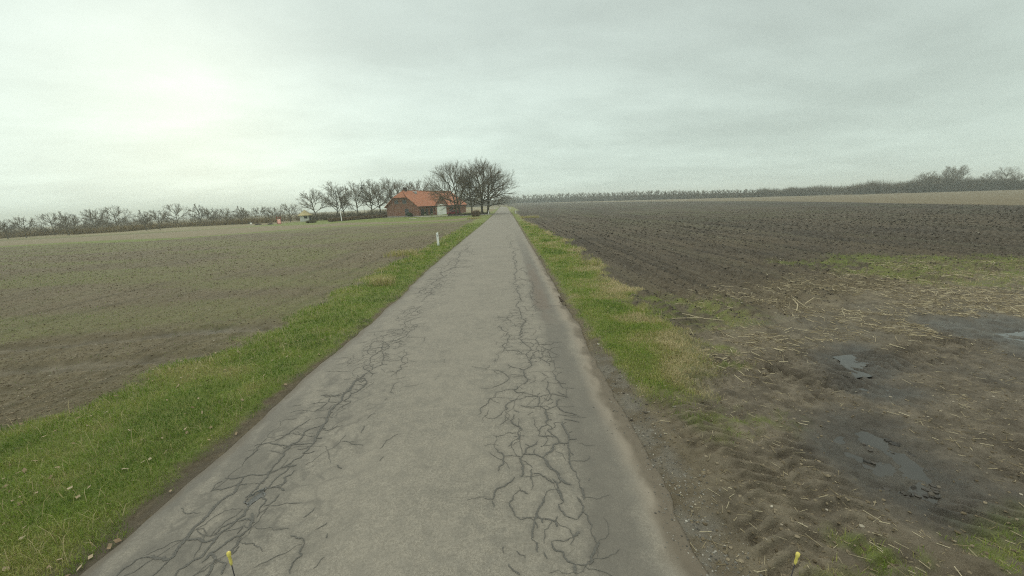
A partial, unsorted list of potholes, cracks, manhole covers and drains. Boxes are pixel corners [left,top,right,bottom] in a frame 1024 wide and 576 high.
crack [116,307,423,576]
pothole [244,487,266,506]
crack [418,246,475,302]
crack [468,228,619,576]
